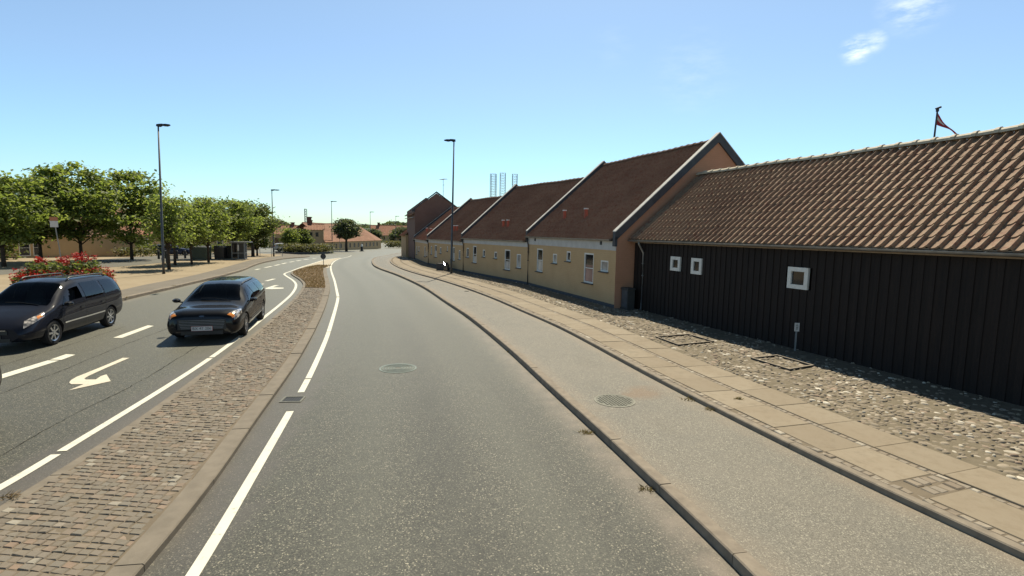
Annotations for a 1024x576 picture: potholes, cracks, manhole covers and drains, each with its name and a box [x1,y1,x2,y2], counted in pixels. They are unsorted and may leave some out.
manhole cover [379,363,417,373]
manhole cover [594,394,636,408]
